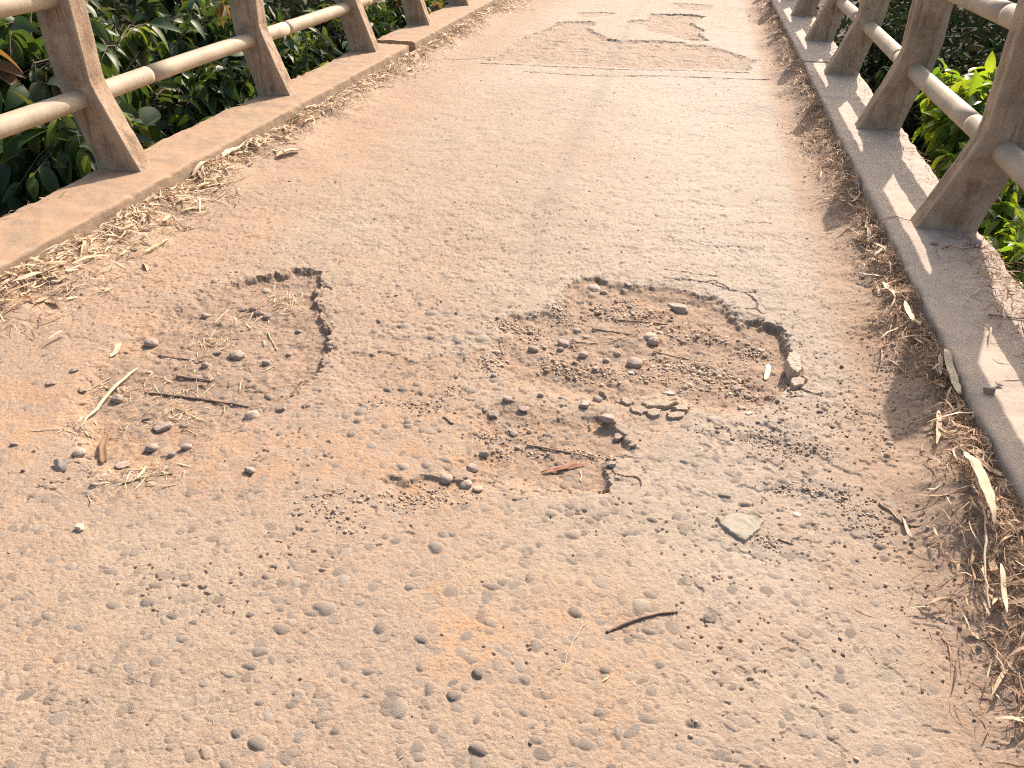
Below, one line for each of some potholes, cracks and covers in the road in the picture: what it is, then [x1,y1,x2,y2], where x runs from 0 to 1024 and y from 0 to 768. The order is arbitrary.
pothole [435,397,634,505]
pothole [485,276,793,421]
pothole [55,268,332,483]
crack [660,268,765,315]
